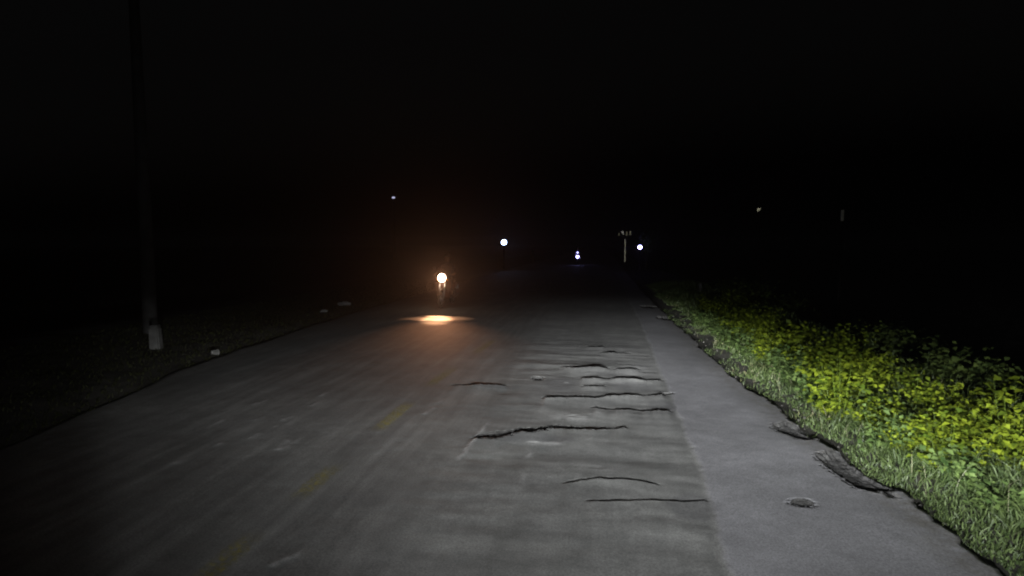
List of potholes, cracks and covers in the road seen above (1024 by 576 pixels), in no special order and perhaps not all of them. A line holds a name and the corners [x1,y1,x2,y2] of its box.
pothole [812,450,903,500]
crack [472,346,672,439]
pothole [789,498,815,508]
pothole [770,420,821,442]
